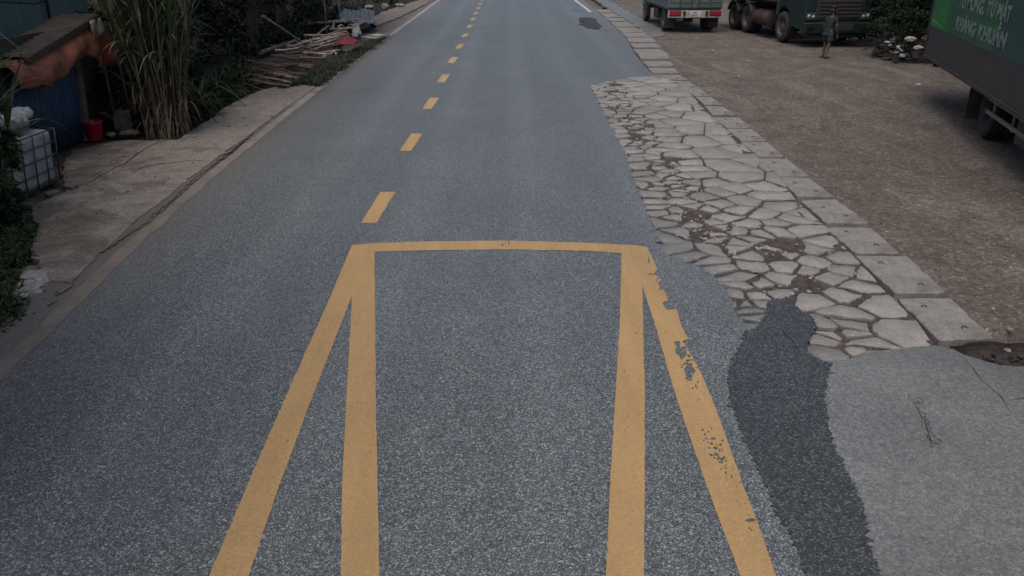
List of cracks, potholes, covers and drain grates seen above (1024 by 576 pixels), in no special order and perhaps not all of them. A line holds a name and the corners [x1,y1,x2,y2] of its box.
pothole [950,341,1024,367]
crack [905,394,941,449]
crack [963,357,1023,419]
crack [590,76,934,362]
